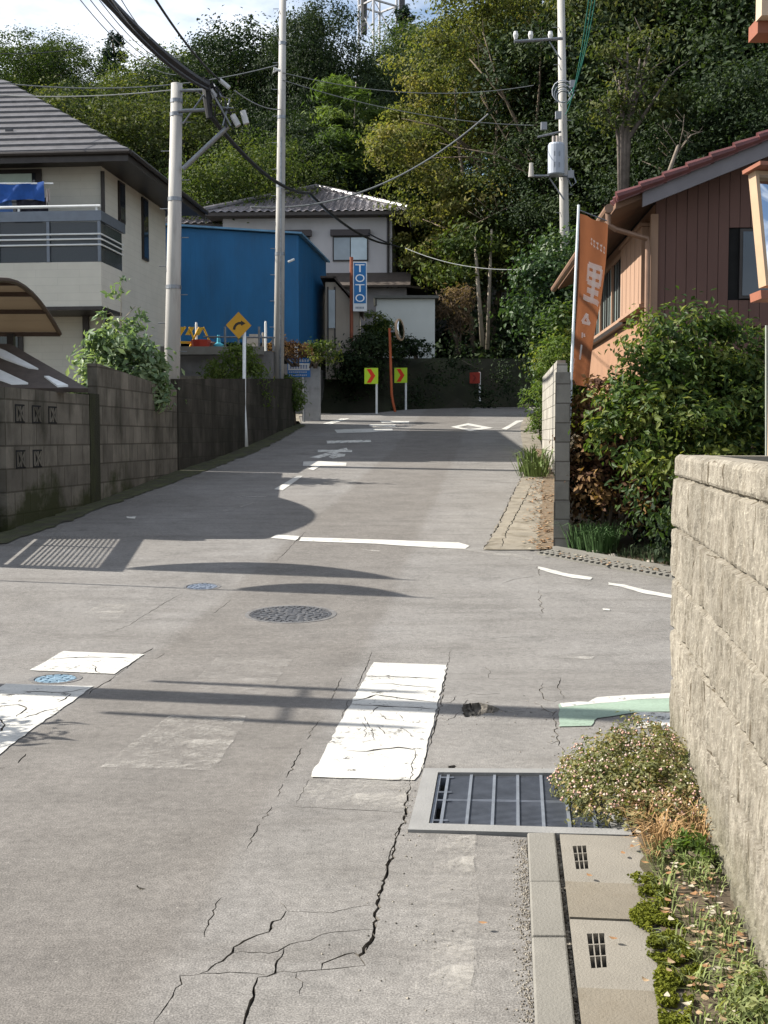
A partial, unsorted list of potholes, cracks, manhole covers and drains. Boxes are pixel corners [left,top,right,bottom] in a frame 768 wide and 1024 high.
drain grate [408,768,632,841]
crack [154,651,566,1024]
manhole cover [245,605,336,623]
manhole cover [29,673,82,684]
